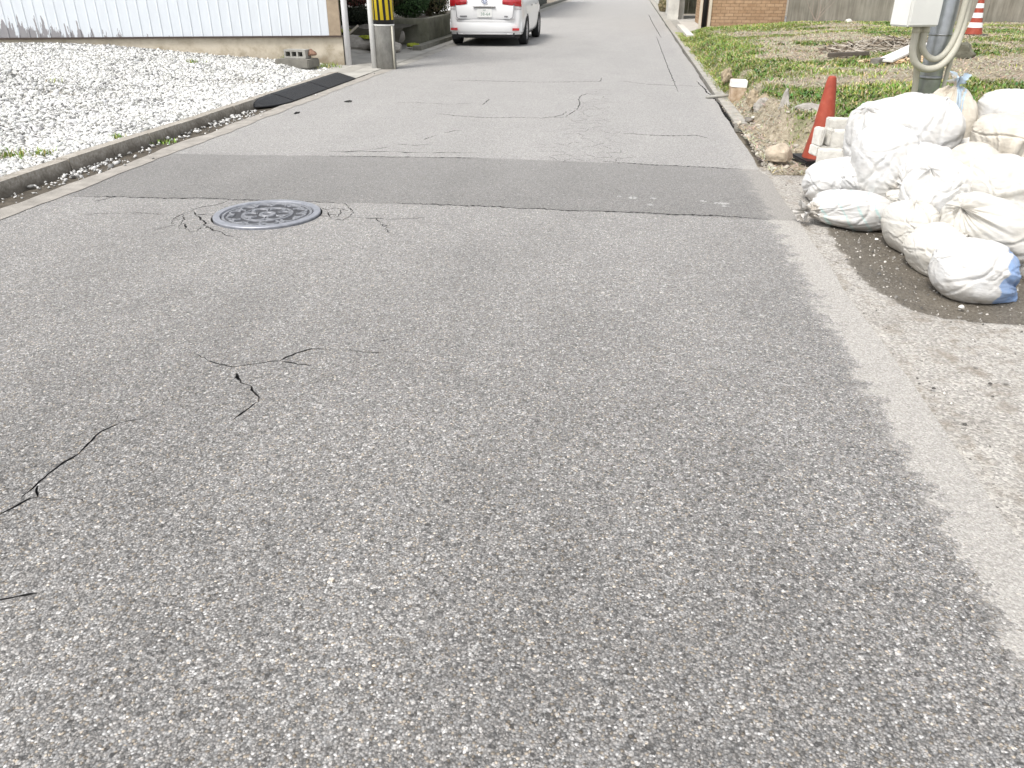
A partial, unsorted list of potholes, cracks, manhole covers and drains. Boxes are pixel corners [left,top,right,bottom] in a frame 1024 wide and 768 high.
crack [329,78,734,169]
crack [75,196,768,237]
crack [0,414,148,514]
manhole cover [212,200,321,230]
crack [0,593,37,601]
crack [186,339,390,419]
